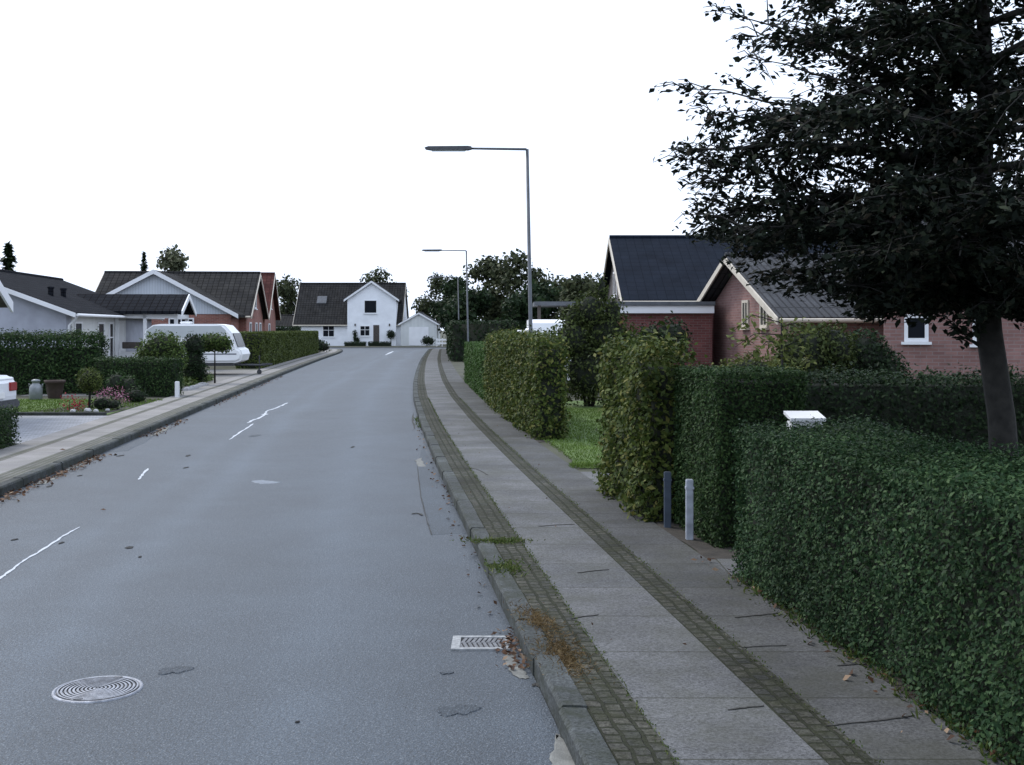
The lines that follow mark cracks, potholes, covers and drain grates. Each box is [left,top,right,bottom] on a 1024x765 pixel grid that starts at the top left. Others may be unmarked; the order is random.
manhole cover [51,676,144,703]
drain grate [451,636,510,651]
